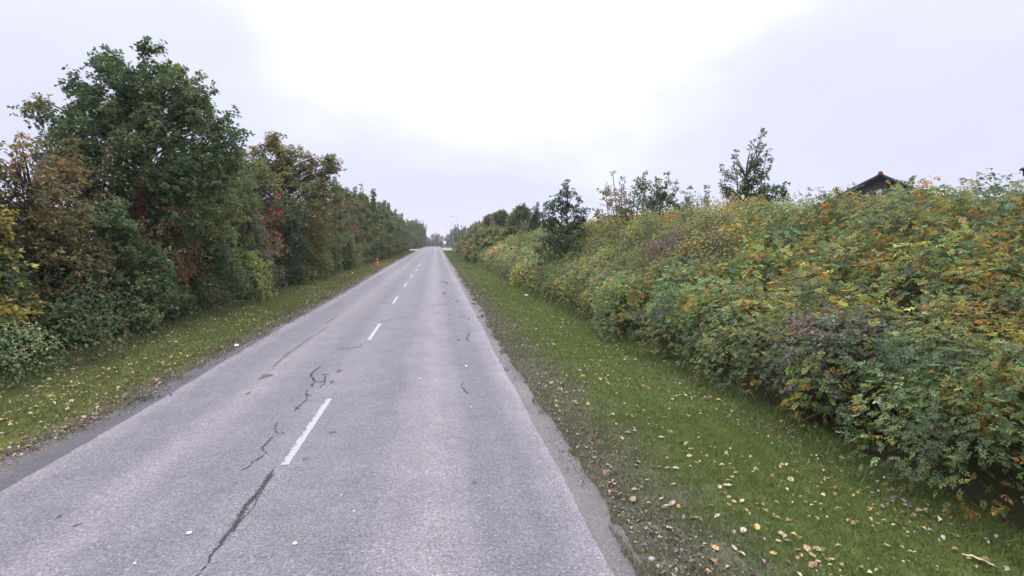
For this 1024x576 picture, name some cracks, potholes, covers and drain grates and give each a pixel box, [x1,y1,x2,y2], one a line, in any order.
crack [294,366,326,411]
crack [196,423,277,576]
